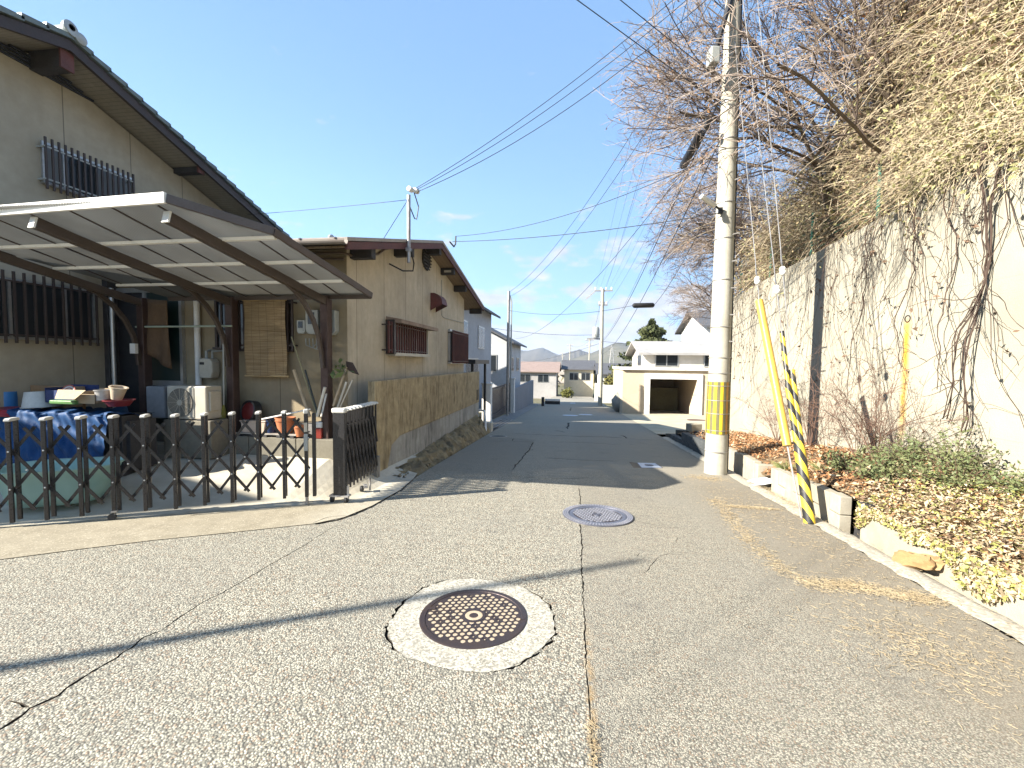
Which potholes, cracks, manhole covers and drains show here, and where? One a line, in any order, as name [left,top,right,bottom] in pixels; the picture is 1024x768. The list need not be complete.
manhole cover [563,504,633,527]
manhole cover [387,578,555,672]
crack [0,526,336,730]
crack [510,409,645,479]
